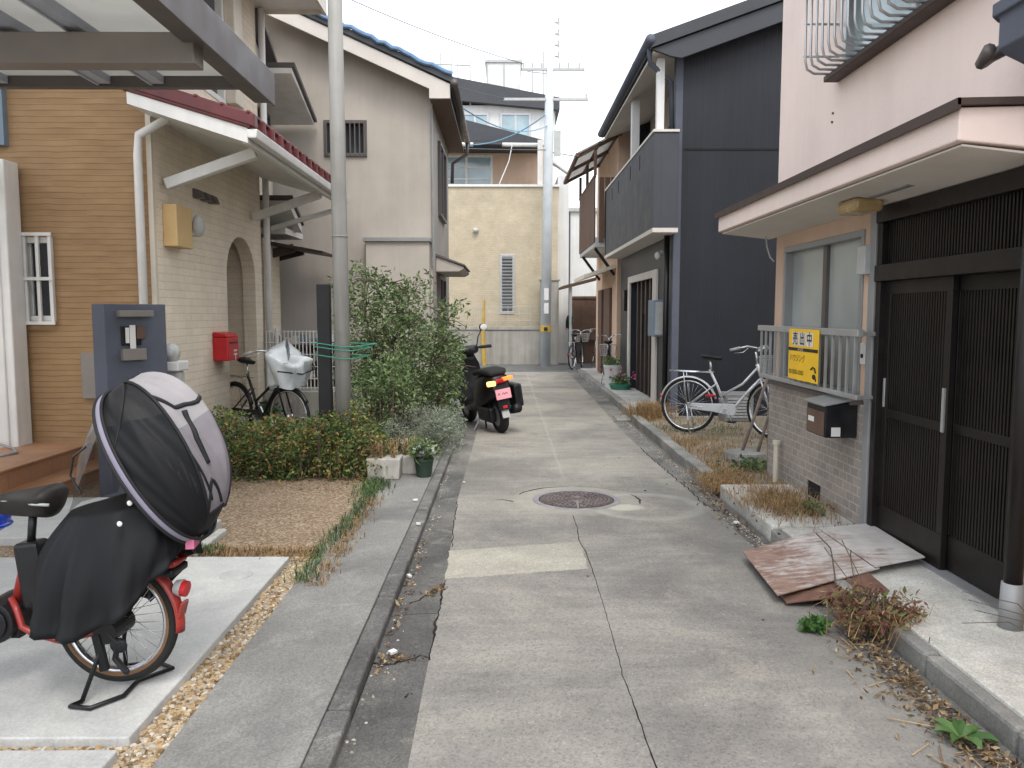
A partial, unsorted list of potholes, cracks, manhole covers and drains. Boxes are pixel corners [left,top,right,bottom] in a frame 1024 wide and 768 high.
crack [573,516,657,768]
manhole cover [533,490,620,510]
crack [372,581,446,666]
